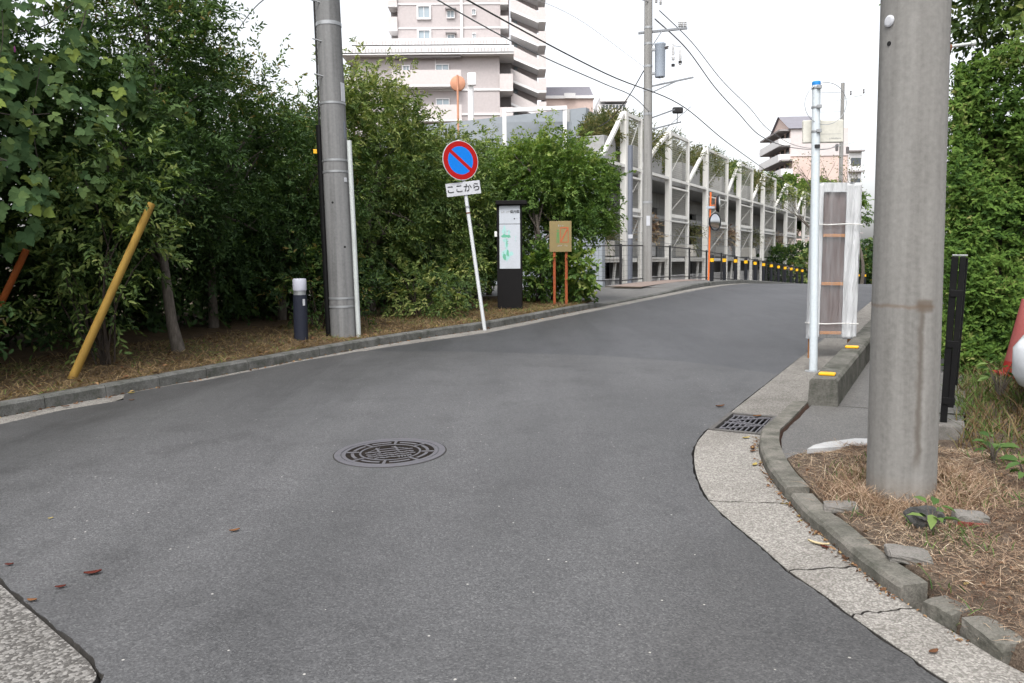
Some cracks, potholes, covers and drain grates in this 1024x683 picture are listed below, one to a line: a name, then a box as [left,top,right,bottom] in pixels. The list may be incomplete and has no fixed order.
drain grate [708,412,777,435]
manhole cover [333,438,447,468]
